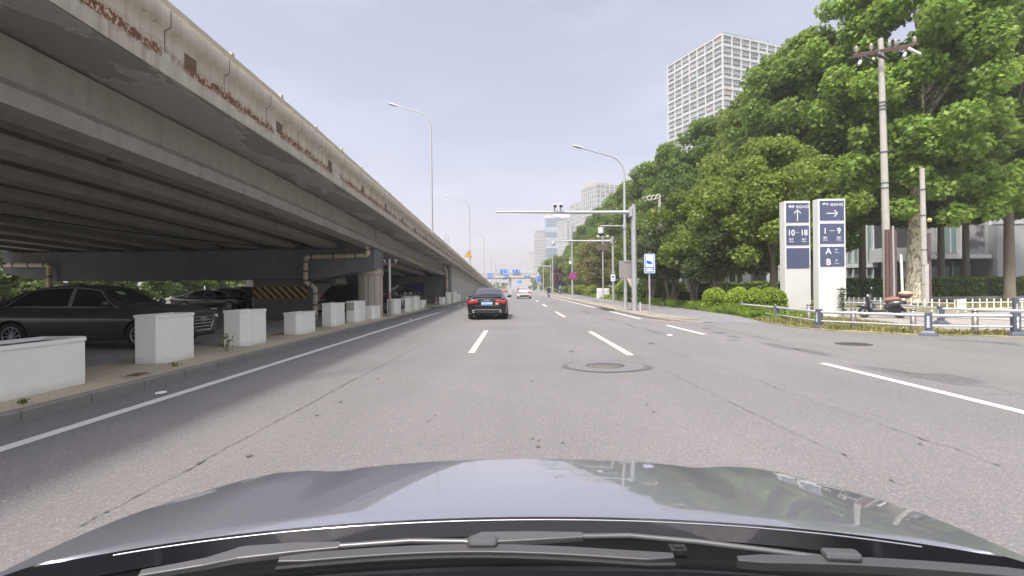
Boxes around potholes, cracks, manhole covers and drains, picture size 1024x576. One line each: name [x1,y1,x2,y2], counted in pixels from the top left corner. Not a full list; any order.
manhole cover [562,360,653,373]
